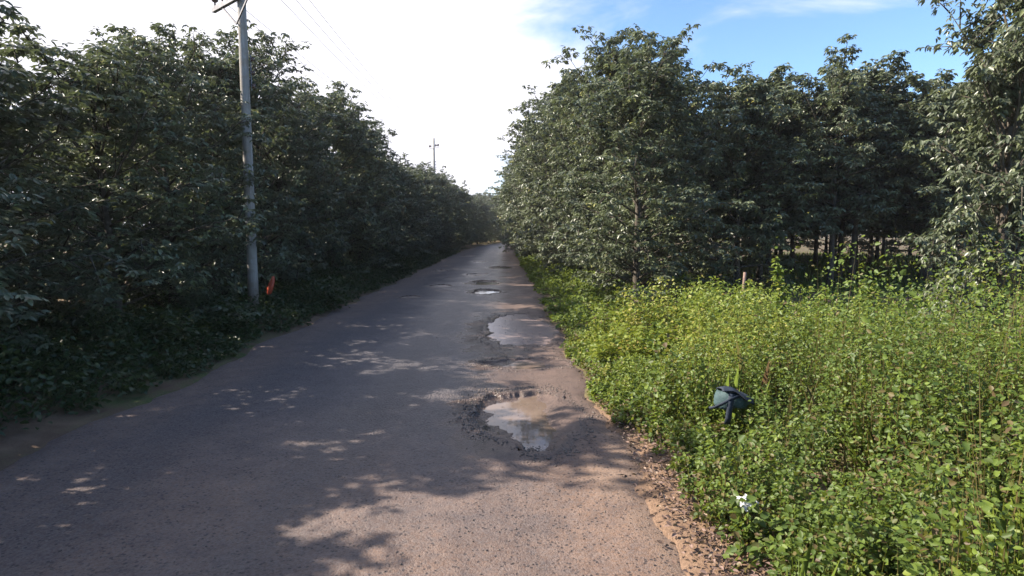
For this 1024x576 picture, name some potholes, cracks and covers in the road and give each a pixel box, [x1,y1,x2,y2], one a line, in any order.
pothole [459,388,592,457]
pothole [480,312,561,348]
